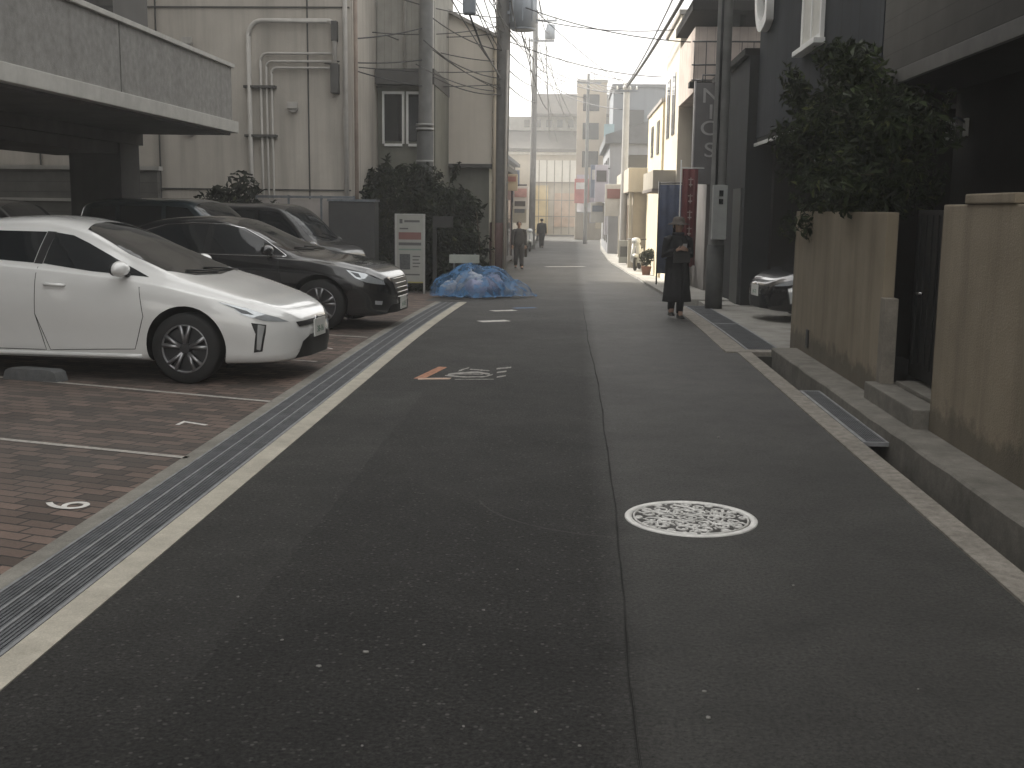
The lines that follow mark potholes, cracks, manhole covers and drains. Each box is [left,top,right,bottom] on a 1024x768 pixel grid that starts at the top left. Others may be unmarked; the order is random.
manhole cover [625,501,758,538]
drain grate [799,390,889,447]
drain grate [0,302,459,657]
drain grate [685,306,739,324]
drain grate [711,323,777,350]
